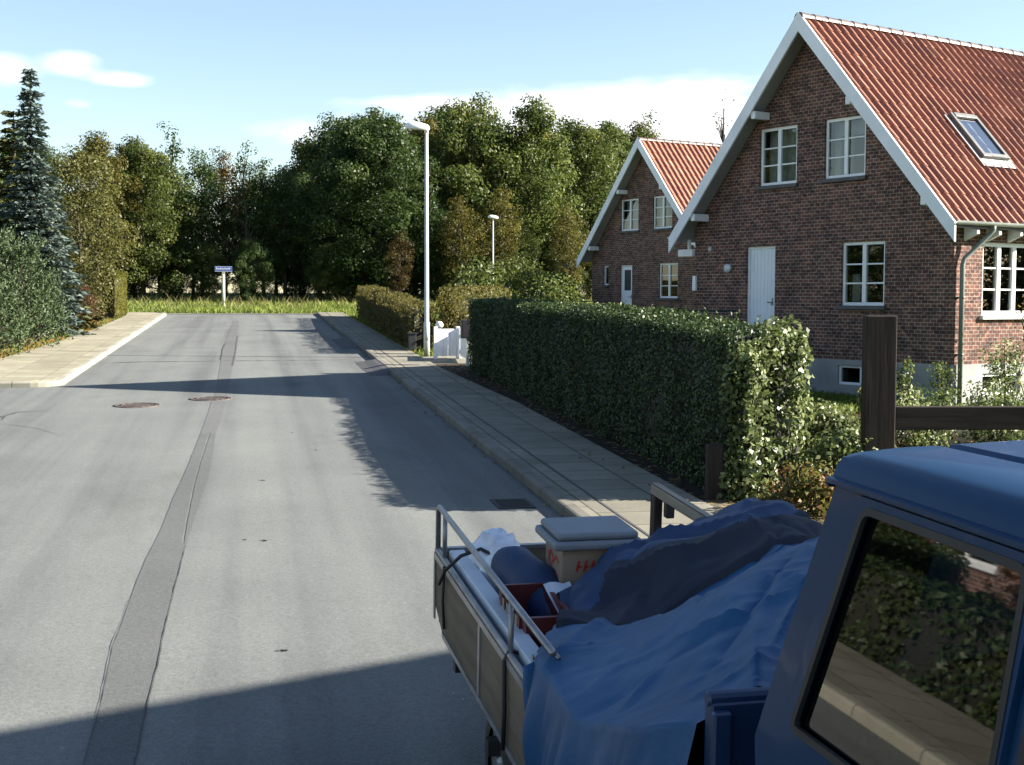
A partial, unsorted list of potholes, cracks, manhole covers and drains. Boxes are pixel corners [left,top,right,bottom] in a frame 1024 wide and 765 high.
drain grate [490,498,536,509]
